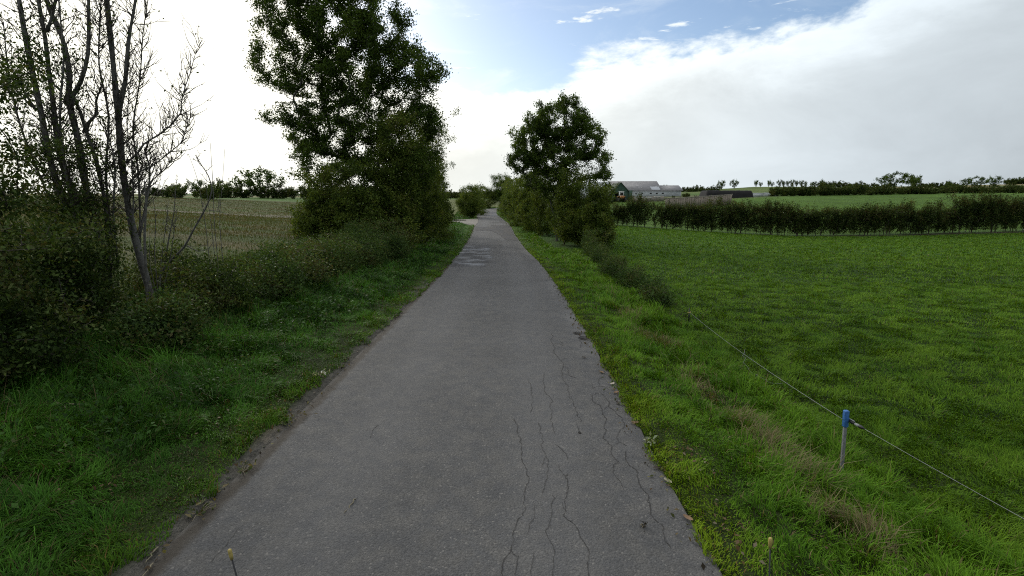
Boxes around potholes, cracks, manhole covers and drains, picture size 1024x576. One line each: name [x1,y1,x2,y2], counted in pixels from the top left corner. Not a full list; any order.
crack [501,334,671,576]
